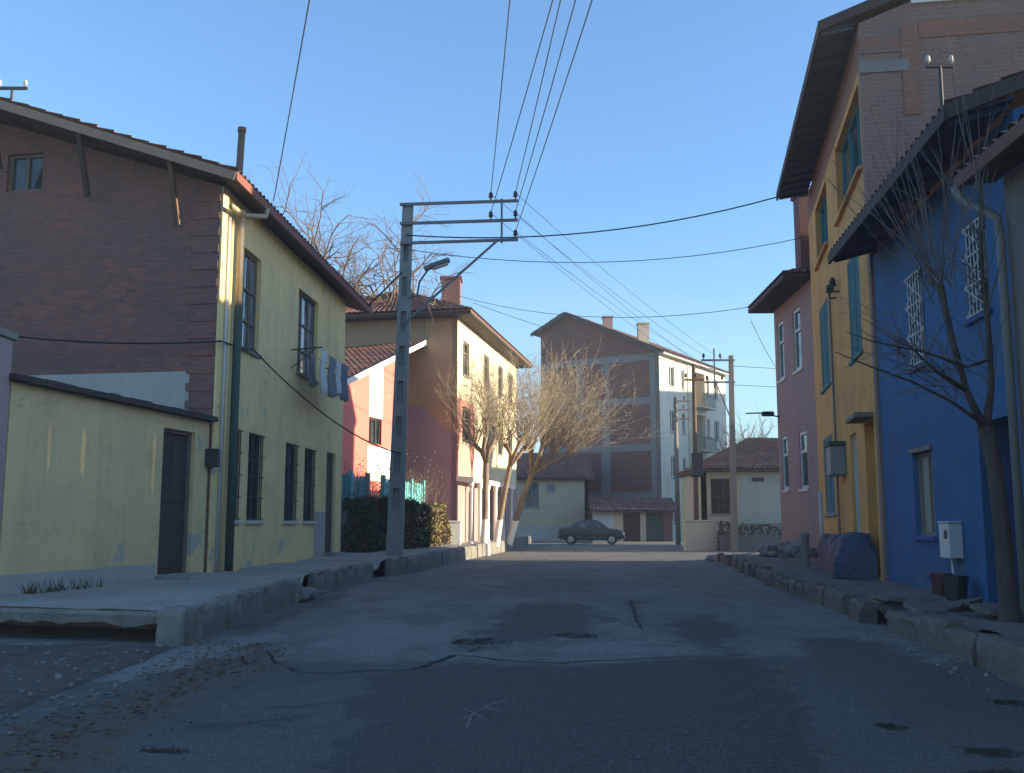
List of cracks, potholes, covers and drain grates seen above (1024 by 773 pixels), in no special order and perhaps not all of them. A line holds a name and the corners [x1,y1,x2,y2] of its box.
pothole [953,745,1024,758]
pothole [139,746,189,754]
pothole [986,698,1024,707]
crack [241,647,745,674]
crack [629,600,643,631]
pothole [548,631,605,639]
pothole [872,722,909,731]
crack [185,701,341,728]
pothole [445,635,512,646]
